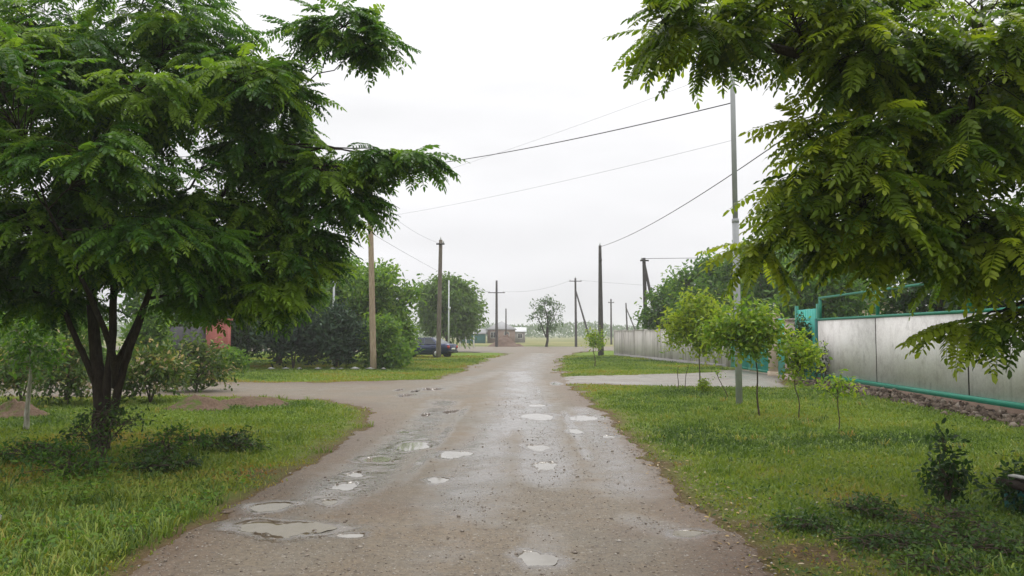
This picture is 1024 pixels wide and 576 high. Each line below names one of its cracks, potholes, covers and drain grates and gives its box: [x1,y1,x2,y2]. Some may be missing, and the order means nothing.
pothole [316,480,369,493]
pothole [349,455,403,464]
pothole [386,440,440,453]
pothole [215,516,354,544]
pothole [522,459,565,474]
pothole [419,476,459,486]
pothole [519,443,558,453]
pothole [220,499,309,517]
pothole [429,449,484,460]
pothole [661,527,723,540]
pothole [513,412,562,421]
pothole [504,547,575,571]
